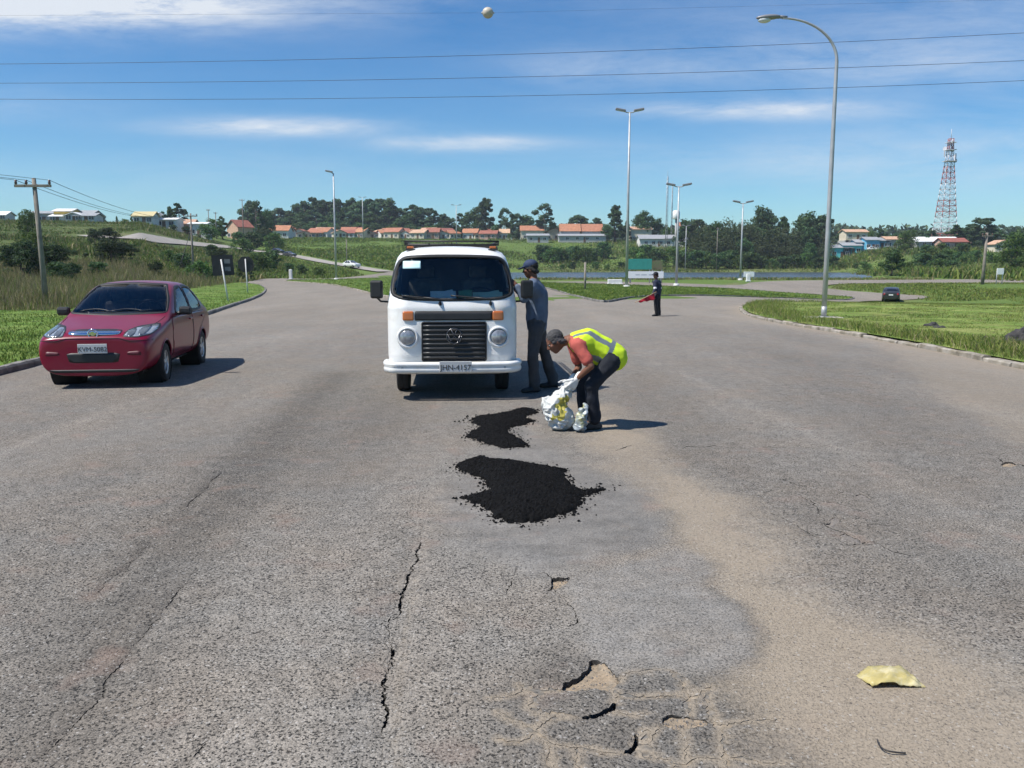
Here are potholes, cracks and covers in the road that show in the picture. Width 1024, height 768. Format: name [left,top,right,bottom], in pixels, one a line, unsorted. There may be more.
crack [771,479,913,558]
crack [488,669,781,768]
pothole [545,577,572,589]
crack [380,531,421,756]
crack [41,585,185,759]
